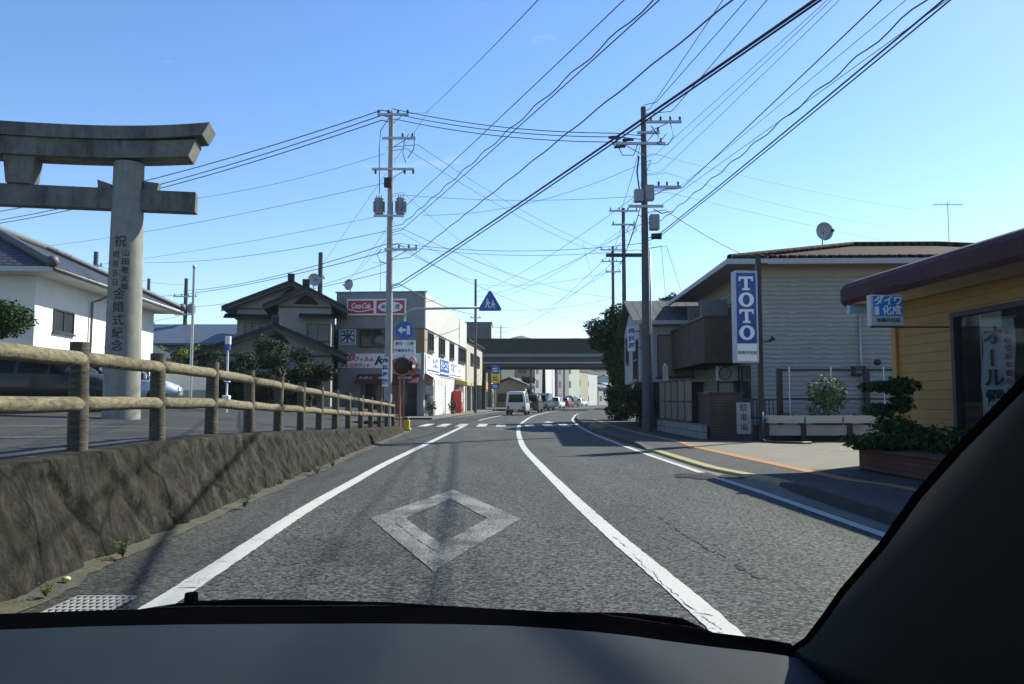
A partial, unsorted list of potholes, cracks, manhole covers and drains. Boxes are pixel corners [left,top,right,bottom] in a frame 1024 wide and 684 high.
drain grate [42,595,136,612]
